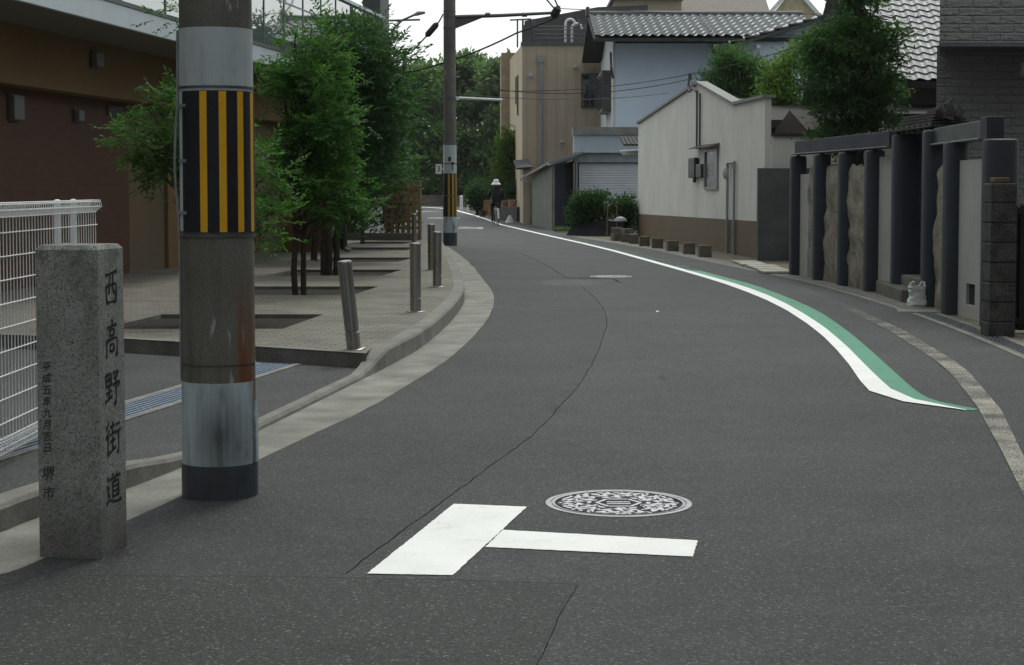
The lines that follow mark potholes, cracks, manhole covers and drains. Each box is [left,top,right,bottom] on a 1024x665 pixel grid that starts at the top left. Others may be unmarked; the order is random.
drain grate [125,390,182,409]
drain grate [255,363,291,376]
drain grate [969,332,1009,341]
manhole cover [546,490,692,518]
drain grate [990,340,1024,350]
crack [346,278,622,574]
drain grate [949,324,980,332]
drain grate [125,408,153,417]
drain grate [930,317,966,325]
